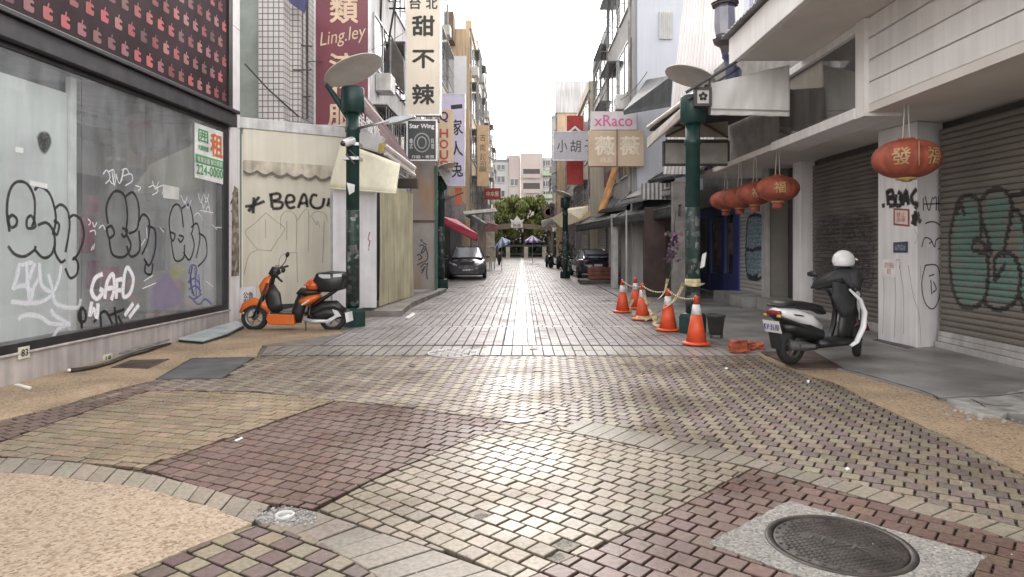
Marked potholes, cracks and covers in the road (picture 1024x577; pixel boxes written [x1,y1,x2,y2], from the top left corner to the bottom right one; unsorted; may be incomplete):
manhole cover [156,357,254,381]
drain grate [111,359,169,369]
manhole cover [708,501,987,577]
manhole cover [427,349,478,358]
